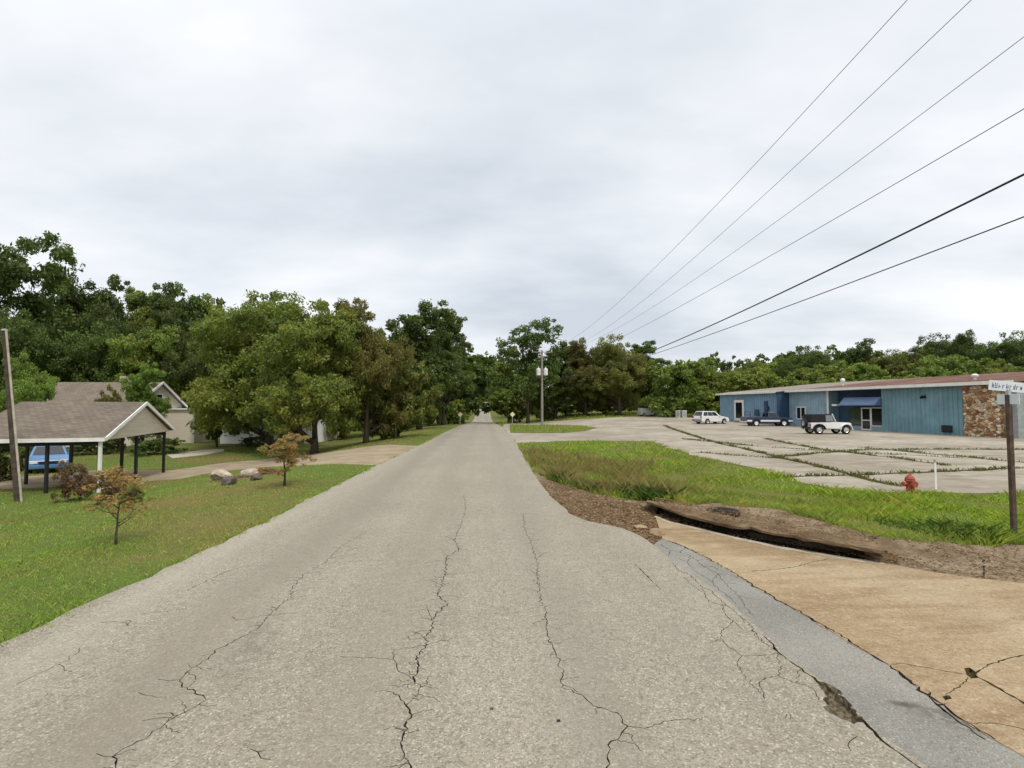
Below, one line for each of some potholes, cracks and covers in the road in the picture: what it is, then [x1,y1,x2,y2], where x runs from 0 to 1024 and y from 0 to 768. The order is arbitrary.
manhole cover [706,507,741,515]
crack [96,532,380,768]
crack [341,497,470,768]
crack [635,544,822,699]
crack [891,655,1024,704]
pothole [818,681,864,724]
crack [520,515,702,768]
